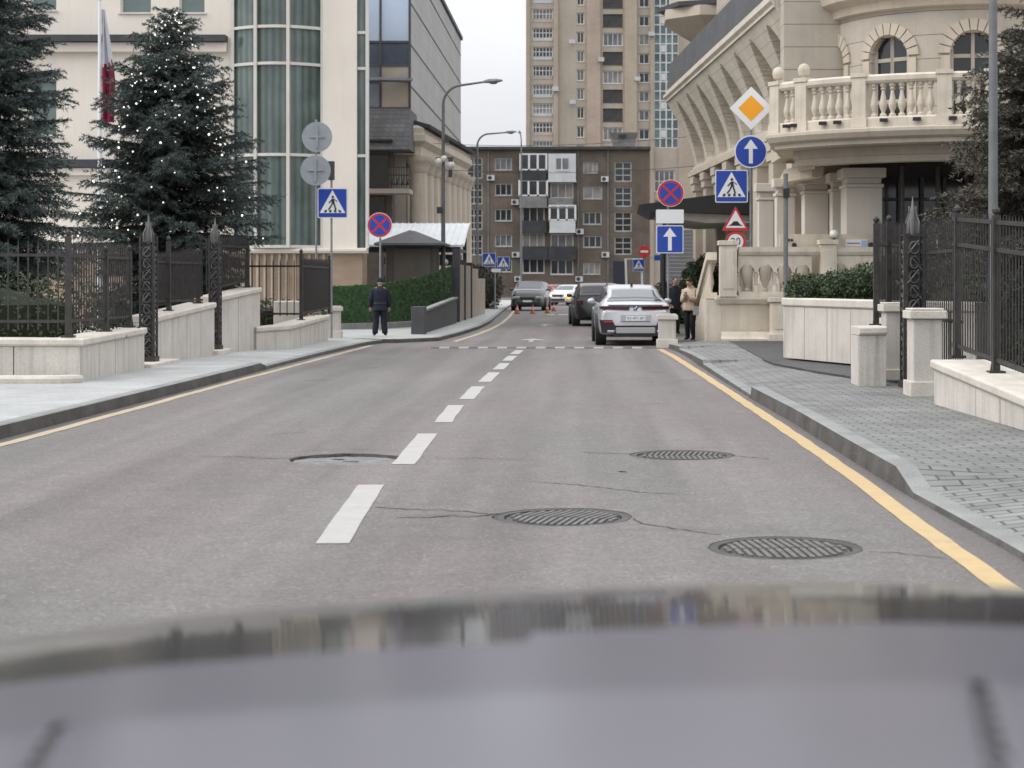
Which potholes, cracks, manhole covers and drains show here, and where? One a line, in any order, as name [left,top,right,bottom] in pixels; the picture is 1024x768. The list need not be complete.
manhole cover [630,450,734,460]
crack [375,506,498,518]
crack [533,481,681,494]
manhole cover [493,508,632,526]
manhole cover [708,537,863,560]
